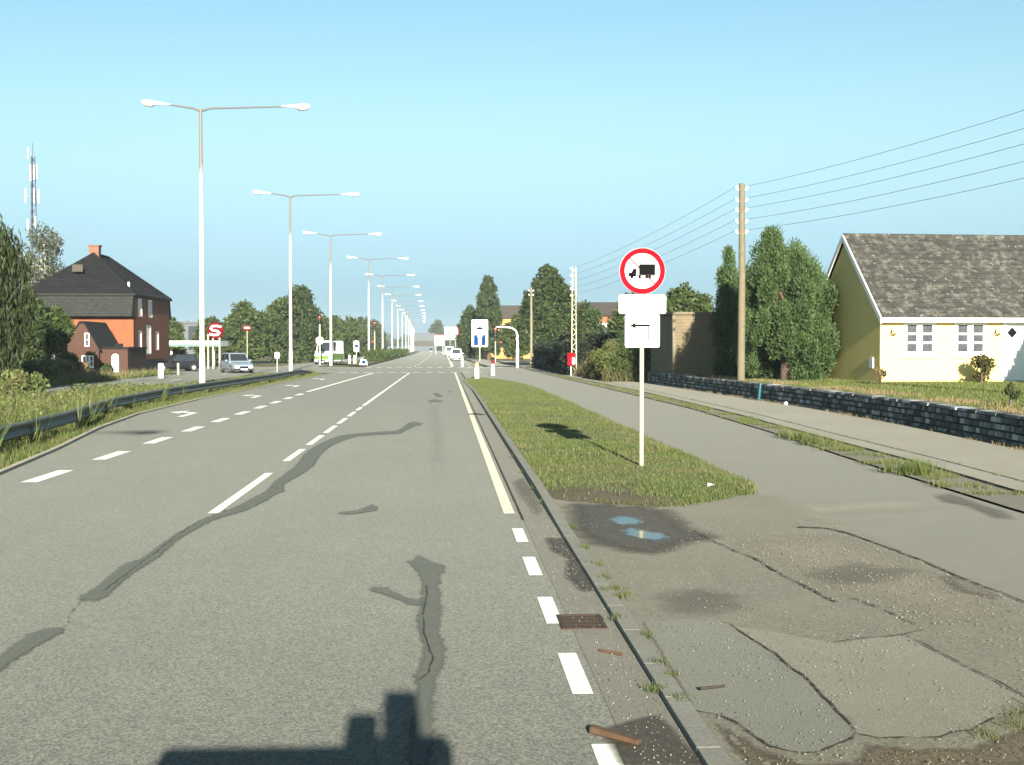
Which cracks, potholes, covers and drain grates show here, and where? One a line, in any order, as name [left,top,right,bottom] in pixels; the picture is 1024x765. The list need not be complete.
drain grate [556,614,608,630]
crack [695,531,1024,753]
crack [420,585,434,679]
